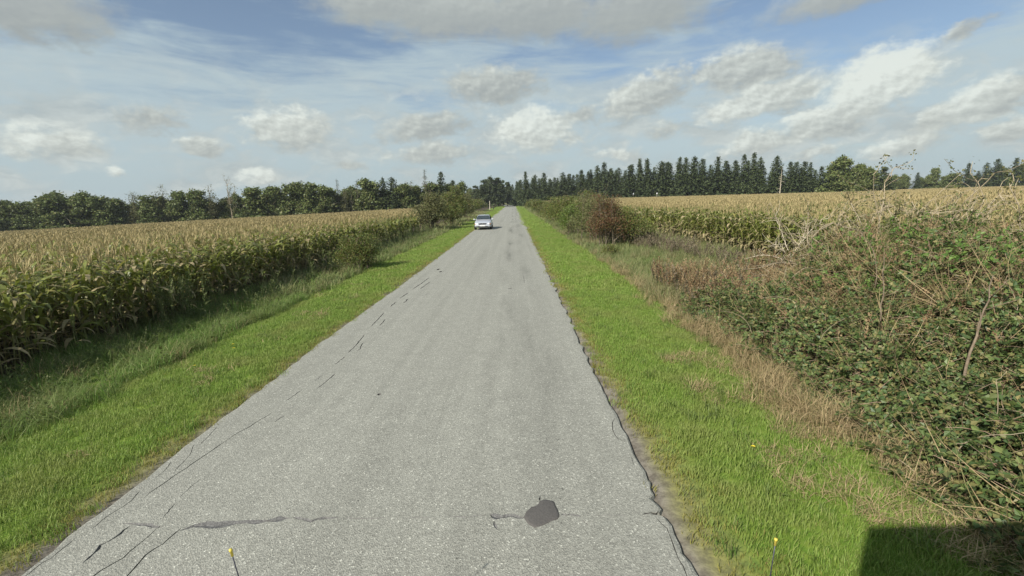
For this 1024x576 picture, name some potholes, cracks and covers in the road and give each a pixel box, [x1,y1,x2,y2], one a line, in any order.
crack [449,496,541,529]
crack [318,279,430,388]
crack [27,413,425,576]
